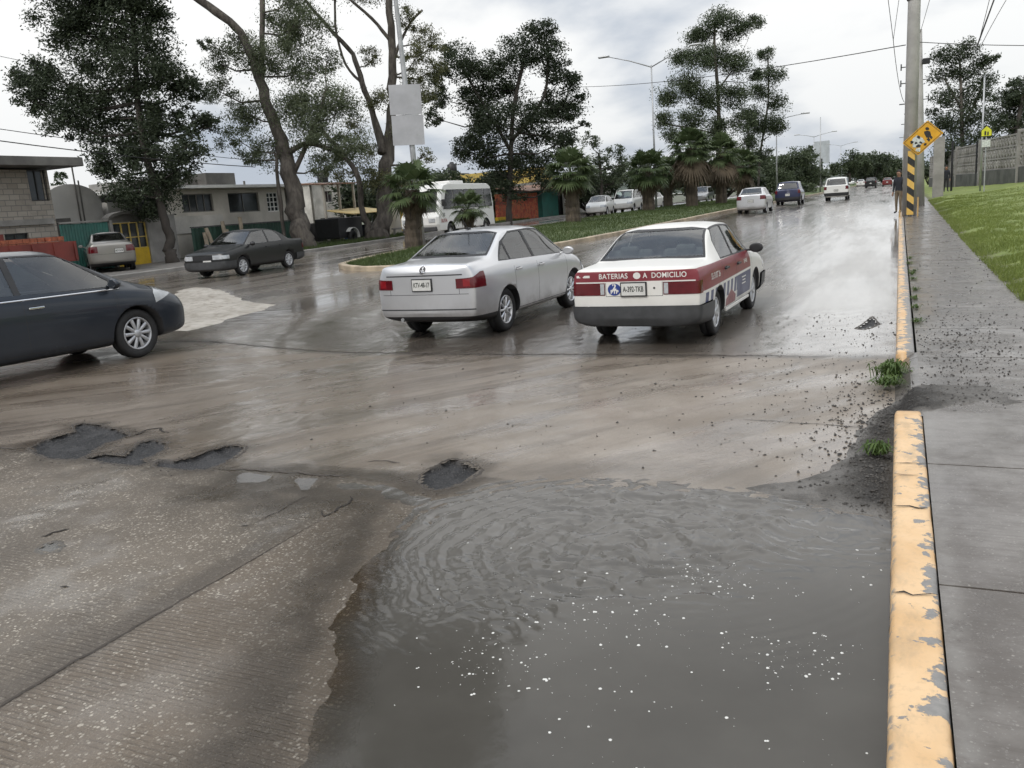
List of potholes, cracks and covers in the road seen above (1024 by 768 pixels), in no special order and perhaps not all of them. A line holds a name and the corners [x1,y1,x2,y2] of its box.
pothole [415,458,485,491]
pothole [82,438,171,467]
pothole [26,423,131,461]
pothole [151,444,248,471]
pothole [854,316,881,330]
